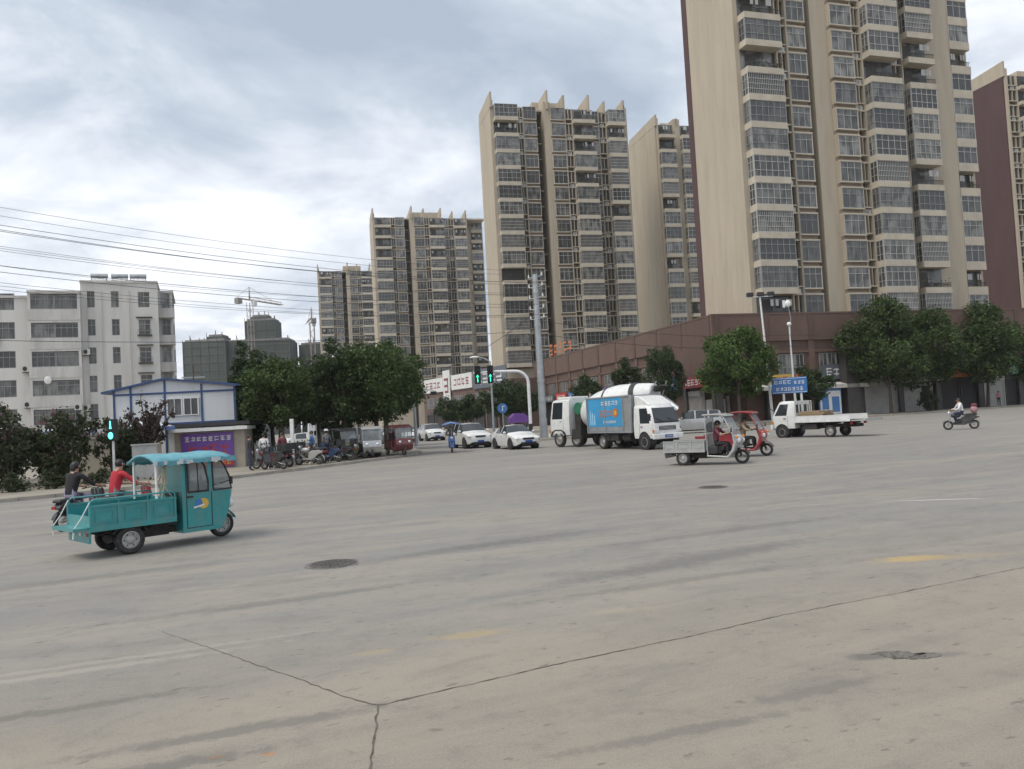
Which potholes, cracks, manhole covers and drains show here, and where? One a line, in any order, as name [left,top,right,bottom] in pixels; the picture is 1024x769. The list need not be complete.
crack [169,567,1024,769]
manhole cover [304,559,359,569]
pothole [872,651,941,660]
